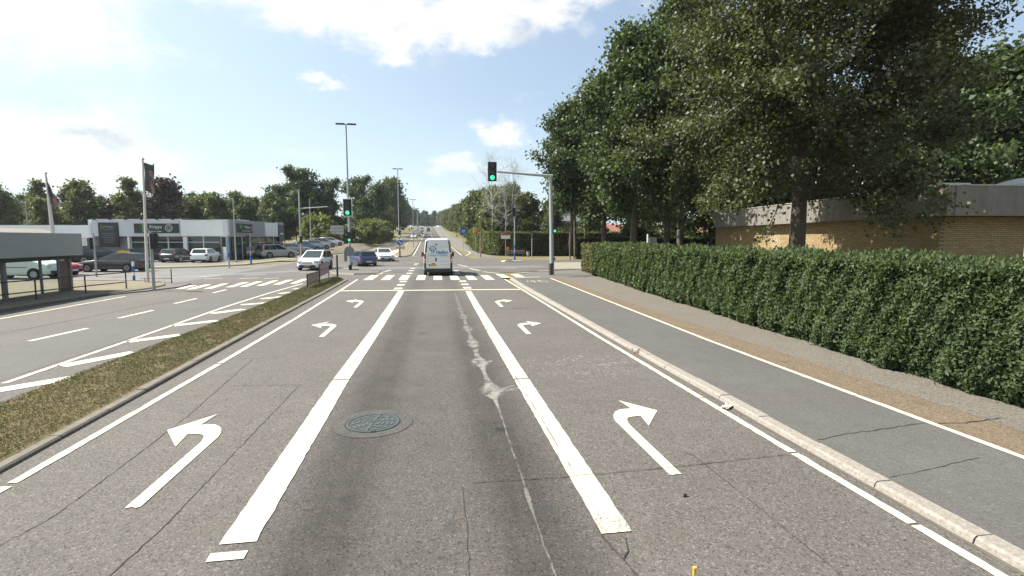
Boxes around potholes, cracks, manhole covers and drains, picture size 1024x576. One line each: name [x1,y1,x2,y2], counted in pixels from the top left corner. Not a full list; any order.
crack [817,418,997,440]
crack [462,451,843,576]
manhole cover [331,410,413,438]
